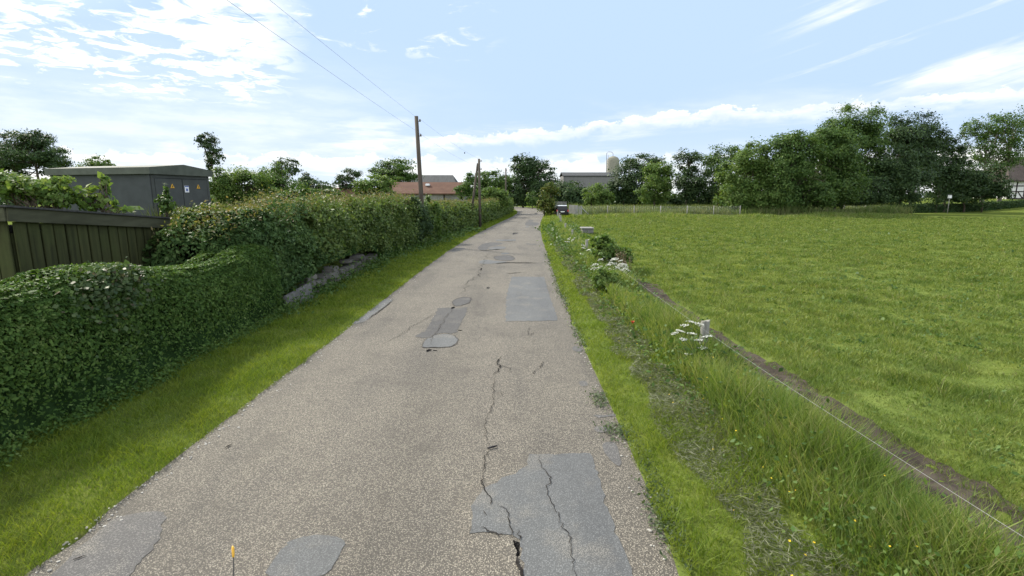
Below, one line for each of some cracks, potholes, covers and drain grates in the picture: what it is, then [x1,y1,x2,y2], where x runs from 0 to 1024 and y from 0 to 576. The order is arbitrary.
crack [515,556,524,576]
crack [538,459,577,576]
crack [481,356,522,539]
